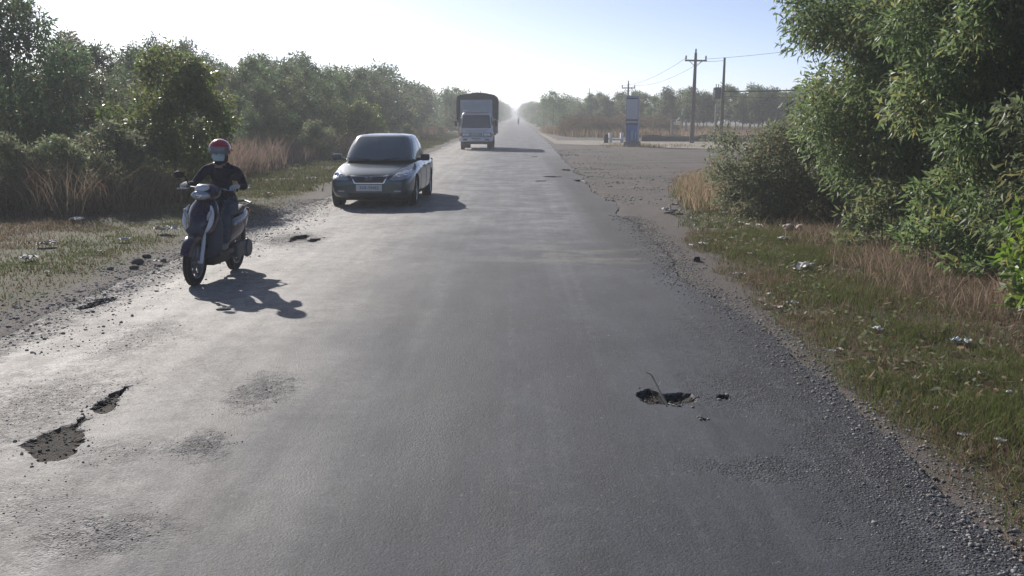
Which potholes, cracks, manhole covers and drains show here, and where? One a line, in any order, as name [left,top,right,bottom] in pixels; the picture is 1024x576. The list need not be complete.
pothole [635,389,698,405]
pothole [90,385,134,414]
pothole [74,297,117,310]
pothole [17,416,94,463]
